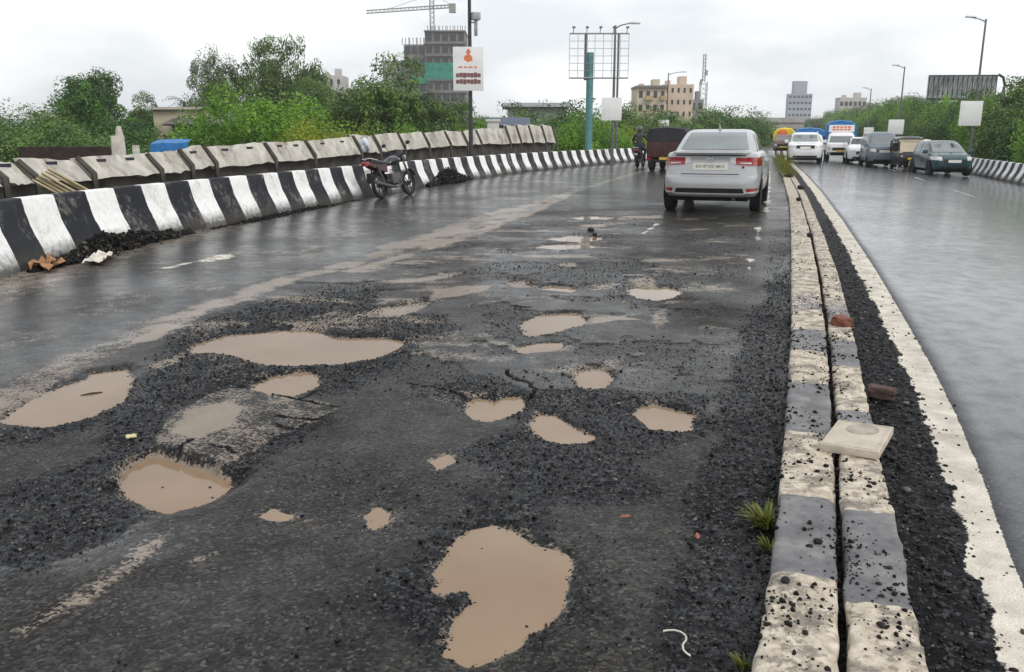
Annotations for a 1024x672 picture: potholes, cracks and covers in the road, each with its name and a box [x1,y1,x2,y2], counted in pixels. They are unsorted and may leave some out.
pothole [456,391,534,423]
pothole [178,325,415,366]
pothole [103,441,246,515]
pothole [512,309,594,337]
pothole [562,363,622,390]
pothole [417,516,584,672]
pothole [244,365,329,396]
pothole [506,339,570,354]
pothole [426,451,461,471]
pothole [623,398,705,433]
crack [240,386,336,430]
crack [505,371,538,400]
